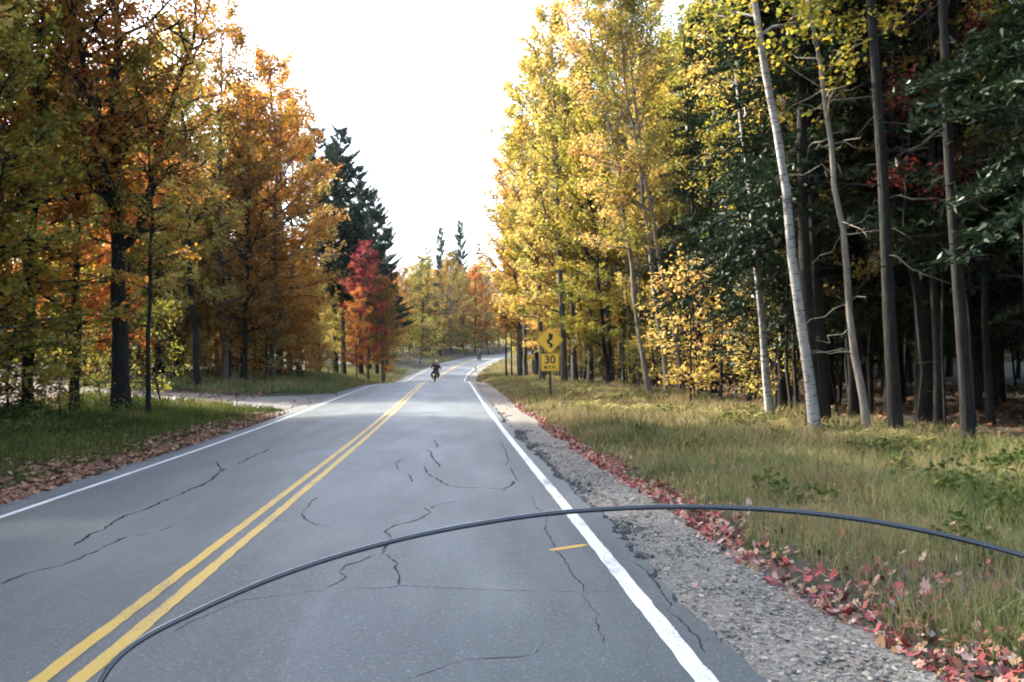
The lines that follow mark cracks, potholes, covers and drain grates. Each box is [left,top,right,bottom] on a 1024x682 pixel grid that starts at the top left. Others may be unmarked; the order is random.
crack [400,642,544,681]
crack [1,449,269,584]
crack [633,562,709,651]
crack [168,500,624,644]
crack [395,440,517,491]
